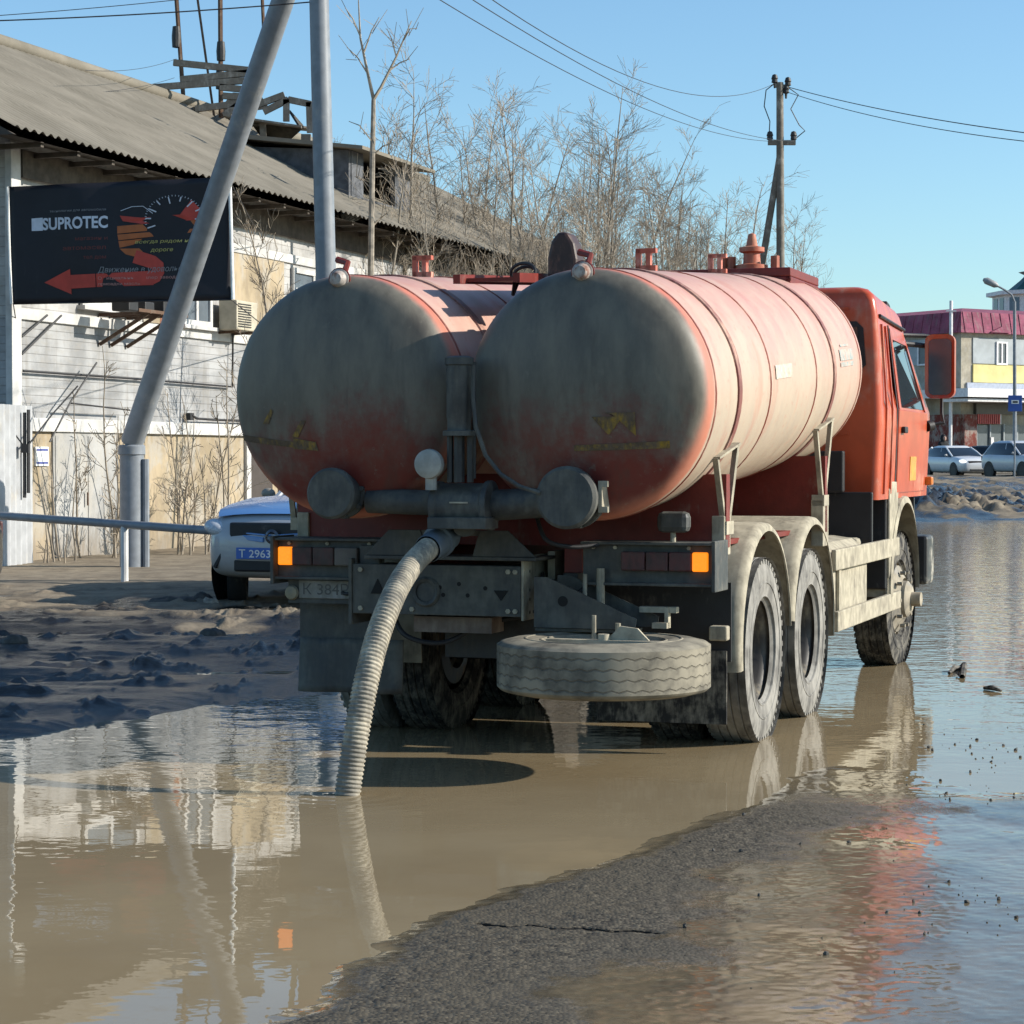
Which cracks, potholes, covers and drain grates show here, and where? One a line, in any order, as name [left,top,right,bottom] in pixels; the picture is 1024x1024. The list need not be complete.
crack [477,923,661,934]
